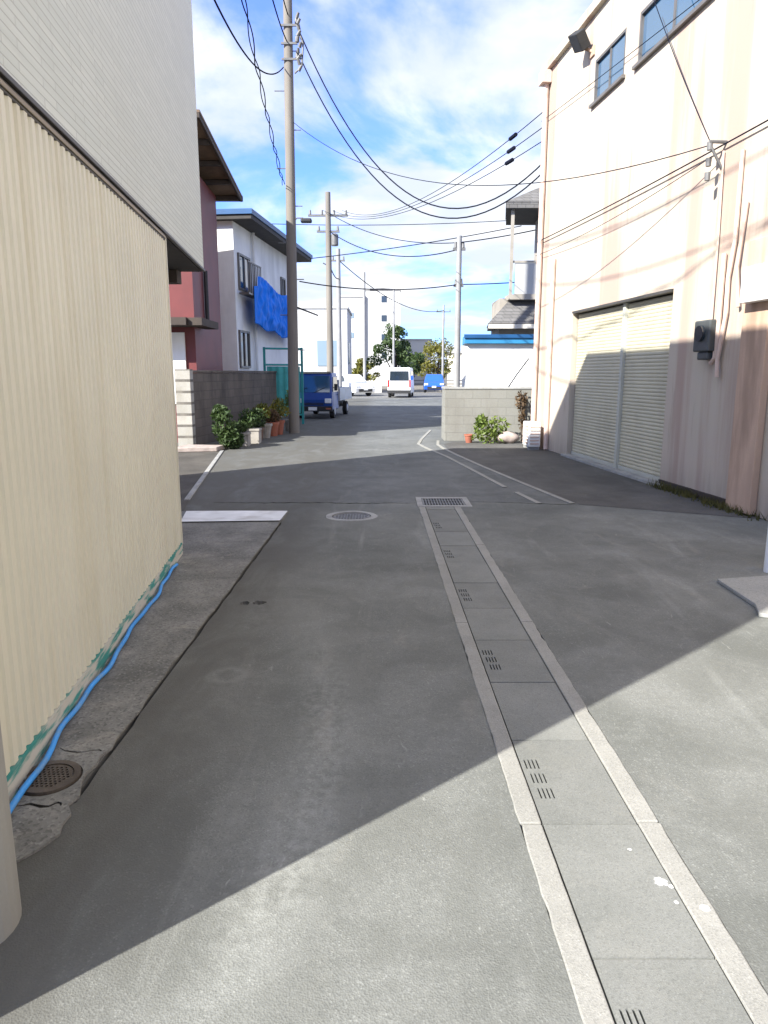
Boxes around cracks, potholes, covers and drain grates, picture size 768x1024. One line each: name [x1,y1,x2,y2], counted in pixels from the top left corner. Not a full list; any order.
manhole cover [326,511,378,521]
drain grate [415,497,473,507]
